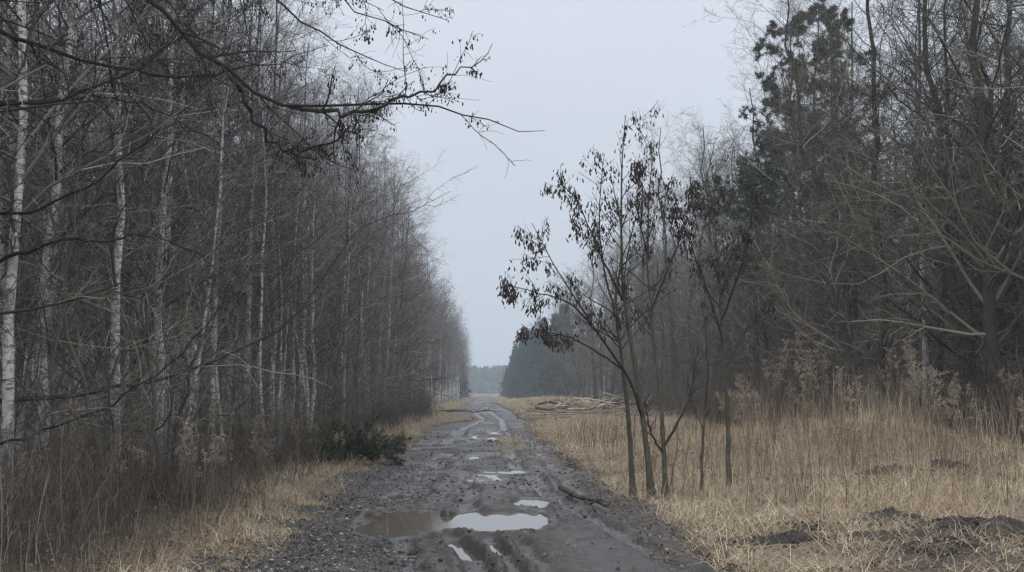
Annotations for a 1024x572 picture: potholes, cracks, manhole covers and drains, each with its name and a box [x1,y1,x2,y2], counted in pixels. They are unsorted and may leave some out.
pothole [433,531,492,564]
pothole [503,495,558,509]
pothole [342,499,564,543]
pothole [473,473,514,485]
pothole [462,454,486,462]
